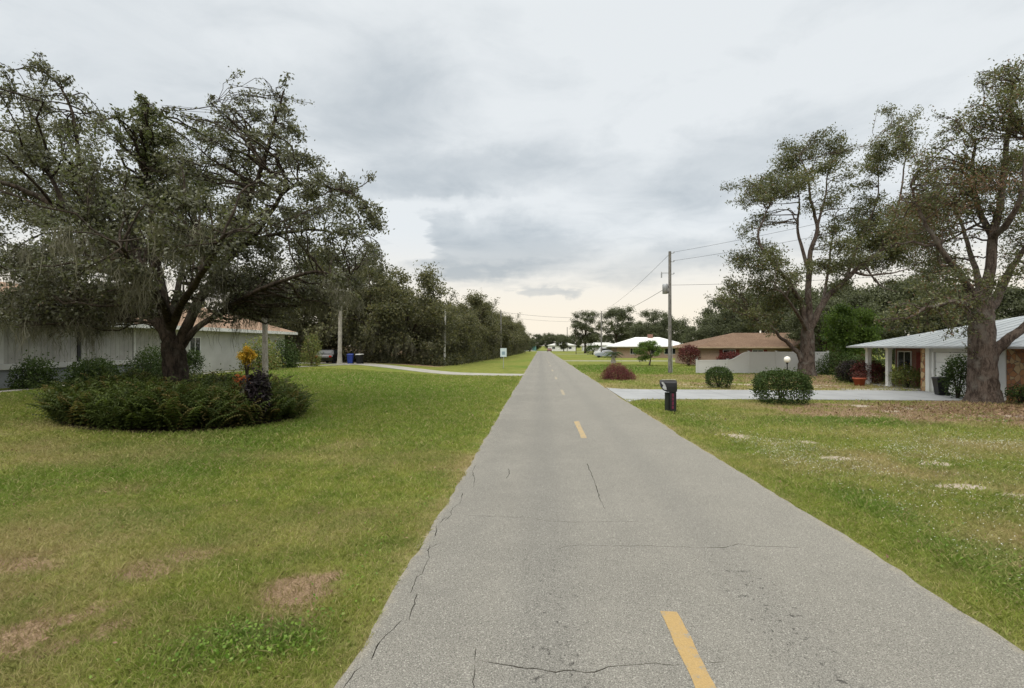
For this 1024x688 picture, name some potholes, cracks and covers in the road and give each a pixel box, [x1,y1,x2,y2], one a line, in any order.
crack [344,465,476,687]
crack [472,650,667,688]
